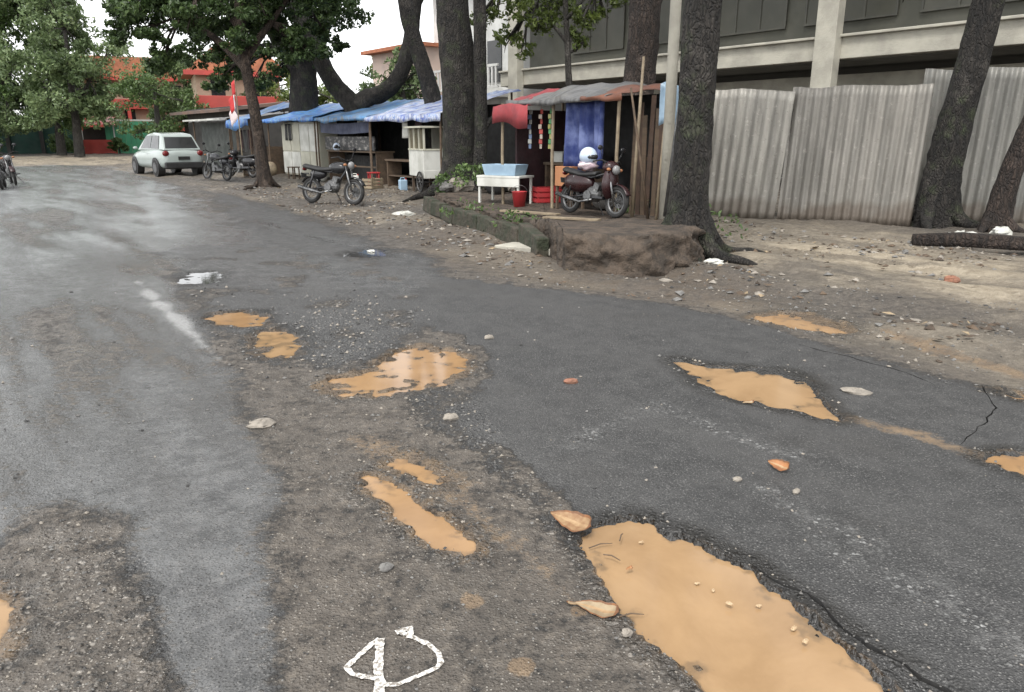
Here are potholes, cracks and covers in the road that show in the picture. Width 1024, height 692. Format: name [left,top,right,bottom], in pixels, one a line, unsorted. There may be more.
pothole [0,593,17,658]
crack [960,386,997,445]
pothole [577,514,903,692]
crack [799,344,934,385]
pothole [358,472,483,557]
pothole [750,310,861,335]
pothole [311,345,475,398]
pothole [386,452,451,485]
pothole [980,449,1024,476]
pothole [247,327,306,359]
pothole [340,247,394,258]
pothole [172,270,231,285]
